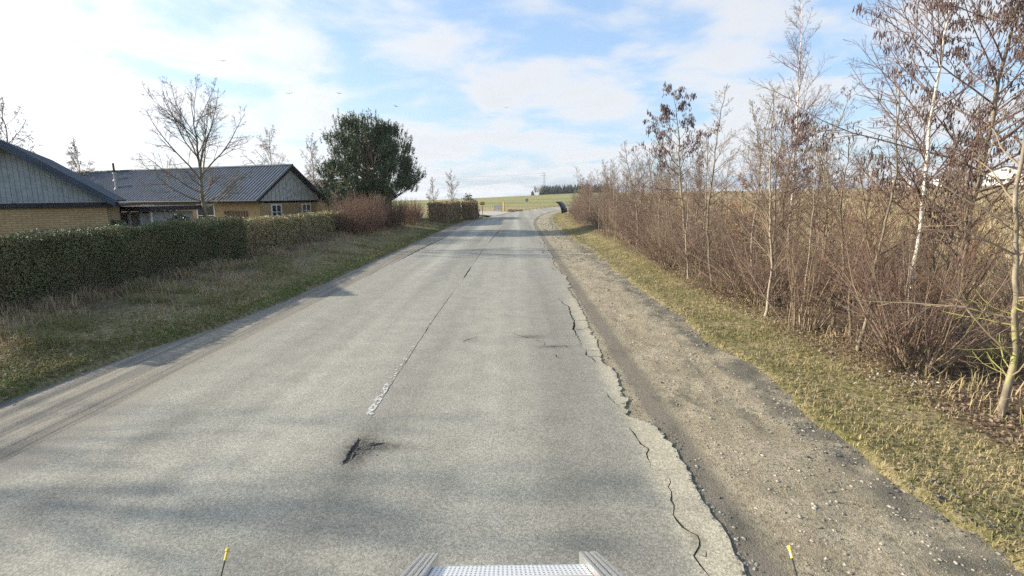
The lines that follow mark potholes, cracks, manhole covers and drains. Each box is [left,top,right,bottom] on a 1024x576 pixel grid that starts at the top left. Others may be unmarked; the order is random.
crack [514,298,597,362]
crack [668,478,709,576]
pothole [342,438,387,464]
